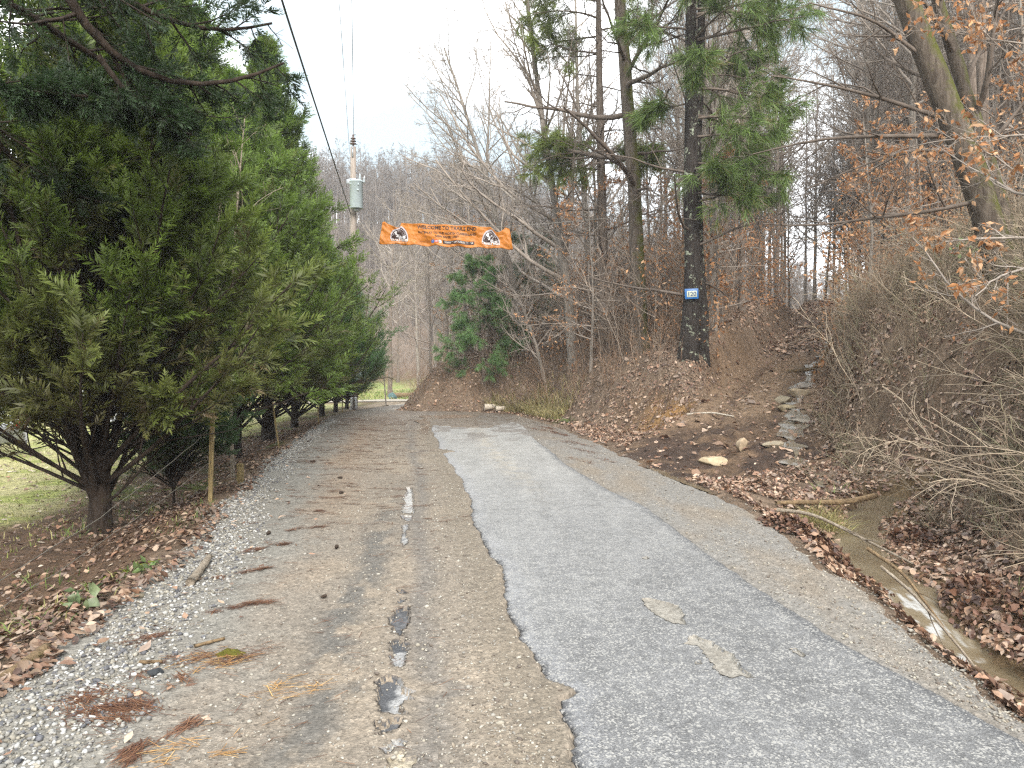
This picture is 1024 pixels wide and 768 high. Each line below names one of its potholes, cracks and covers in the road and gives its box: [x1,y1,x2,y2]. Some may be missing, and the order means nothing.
pothole [374,716,404,735]
pothole [387,605,411,636]
pothole [388,636,411,668]
pothole [373,674,416,715]
pothole [378,738,408,754]
